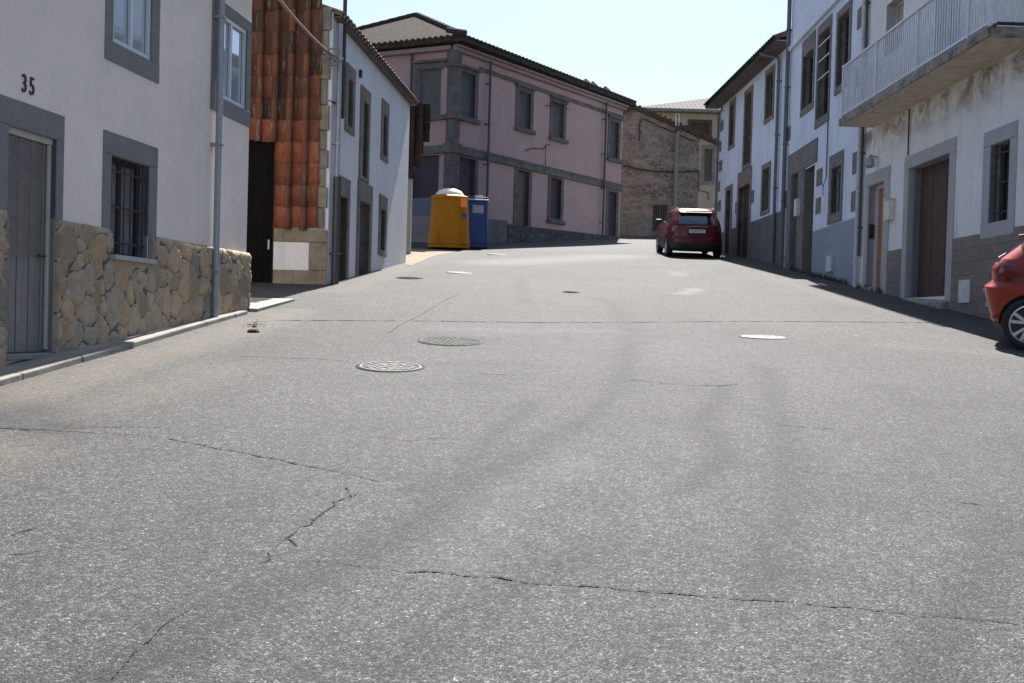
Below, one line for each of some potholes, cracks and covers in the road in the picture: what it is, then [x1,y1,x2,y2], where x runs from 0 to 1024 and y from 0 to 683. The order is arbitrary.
manhole cover [356,361,425,373]
crack [112,609,189,678]
manhole cover [417,337,485,346]
crack [317,560,1020,624]
crack [261,487,356,562]
crack [2,426,378,481]
